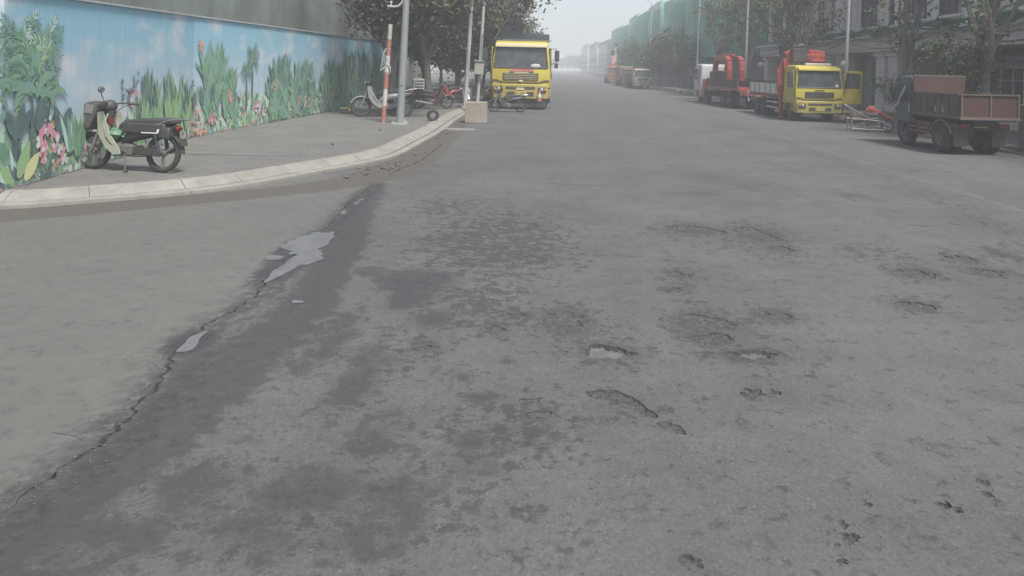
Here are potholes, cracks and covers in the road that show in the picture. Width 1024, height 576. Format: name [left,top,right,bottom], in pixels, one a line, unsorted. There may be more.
pothole [722,350,778,360]
pothole [733,227,783,242]
pothole [681,313,738,332]
pothole [895,301,937,310]
pothole [585,389,658,418]
pothole [934,500,965,513]
pothole [666,225,727,235]
pothole [688,333,734,346]
pothole [655,421,687,435]
pothole [893,269,936,279]
pothole [679,554,704,569]
pothole [739,388,767,400]
